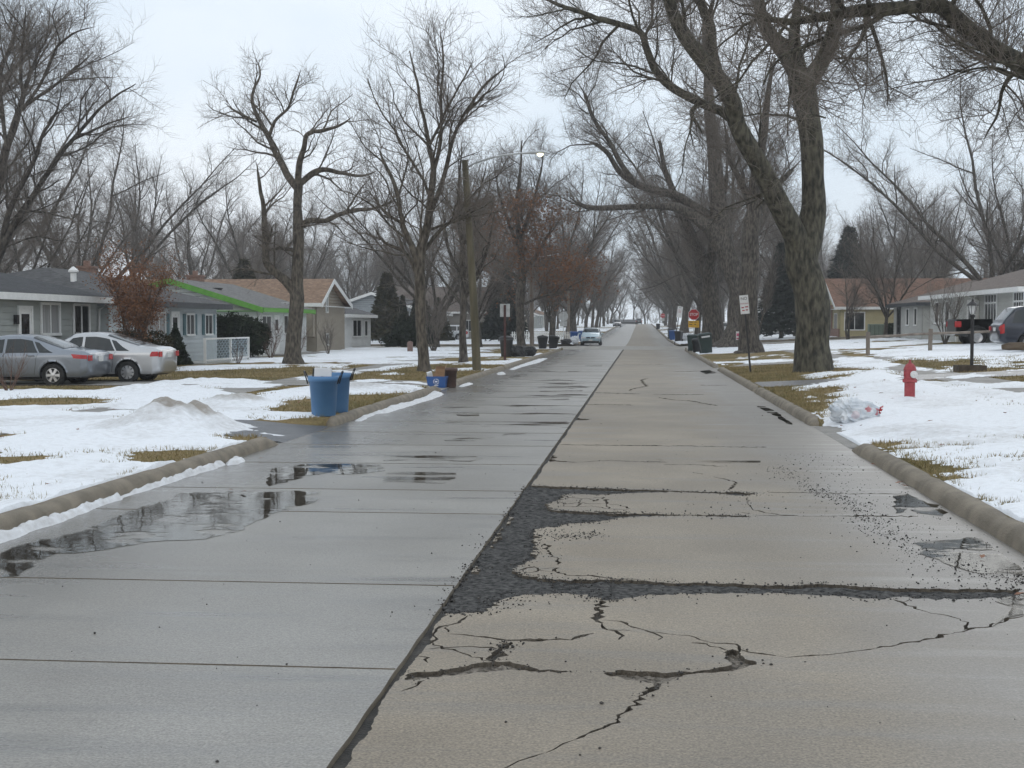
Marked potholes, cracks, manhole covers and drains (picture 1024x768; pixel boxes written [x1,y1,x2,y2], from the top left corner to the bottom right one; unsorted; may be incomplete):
crack [630,378,717,406]
crack [418,600,1023,666]
crack [505,696,646,768]
